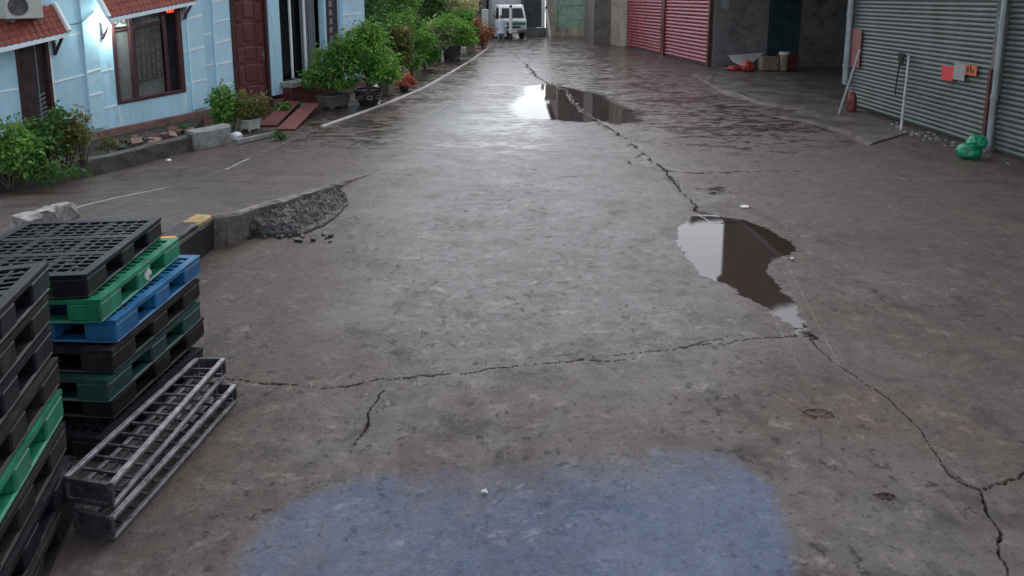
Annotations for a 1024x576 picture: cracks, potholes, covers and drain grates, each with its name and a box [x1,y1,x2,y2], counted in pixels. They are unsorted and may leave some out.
crack [217,327,1024,576]
crack [502,45,813,224]
